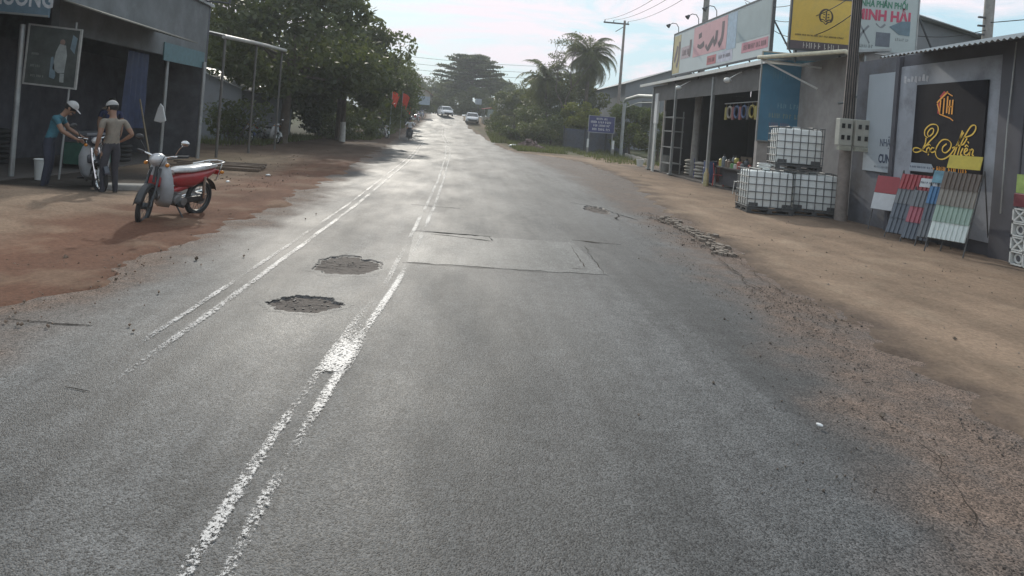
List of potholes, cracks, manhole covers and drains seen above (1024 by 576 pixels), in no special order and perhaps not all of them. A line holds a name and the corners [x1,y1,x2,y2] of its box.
pothole [303,253,392,277]
pothole [254,293,354,316]
crack [8,318,92,326]
pothole [580,204,614,216]
